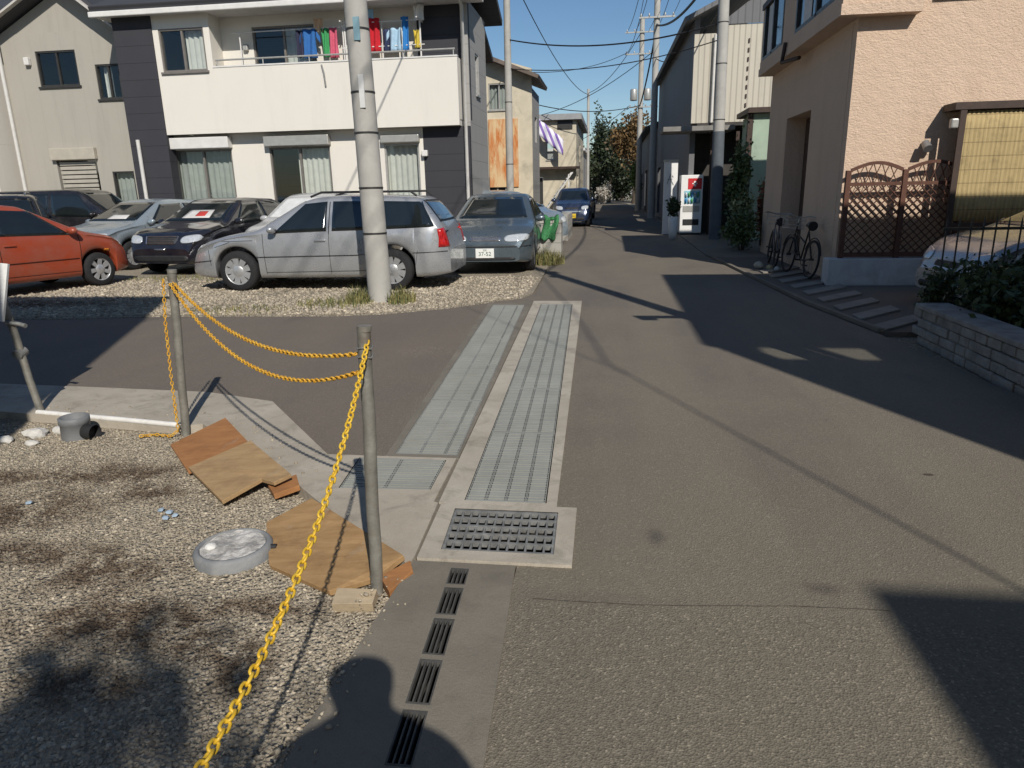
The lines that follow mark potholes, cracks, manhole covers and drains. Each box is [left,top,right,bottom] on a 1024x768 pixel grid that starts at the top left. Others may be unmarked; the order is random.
drain grate [492,388,561,434]
drain grate [340,457,445,490]
drain grate [466,432,555,503]
drain grate [422,618,455,655]
drain grate [536,304,572,318]
drain grate [431,364,498,401]
drain grate [446,568,469,585]
drain grate [509,358,565,389]
utility cover [192,528,277,575]
drain grate [521,335,568,358]
drain grate [455,339,509,365]
drain grate [471,320,518,339]
